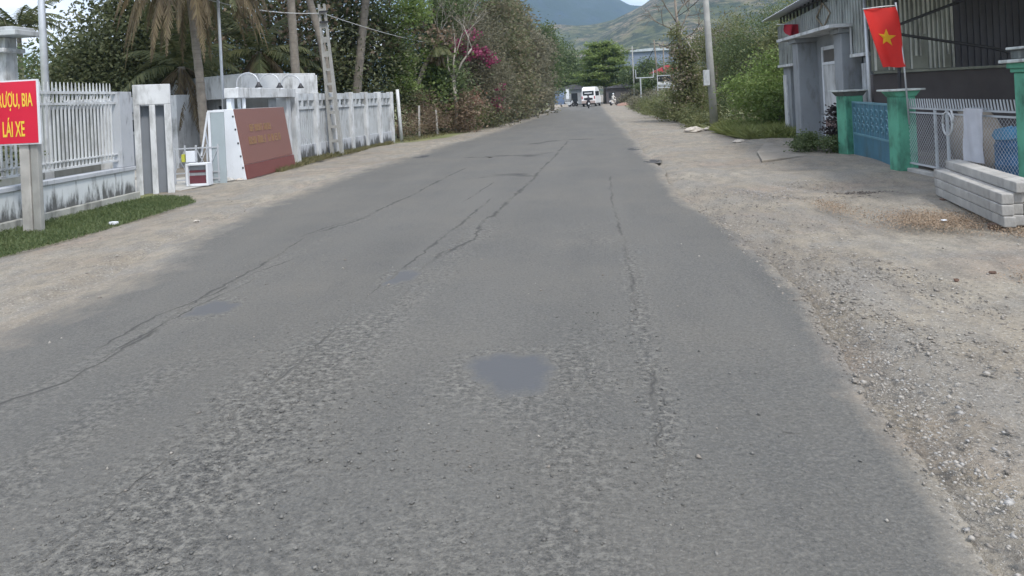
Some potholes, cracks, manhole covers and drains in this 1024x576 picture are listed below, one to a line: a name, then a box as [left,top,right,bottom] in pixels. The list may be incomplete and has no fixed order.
crack [646,364,674,483]
crack [0,138,591,563]
crack [608,176,640,317]
